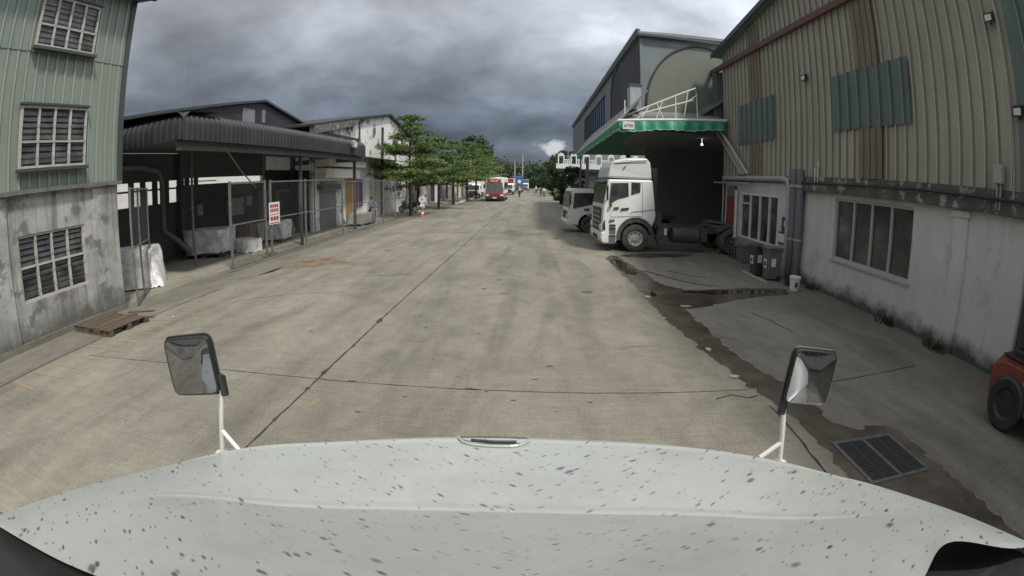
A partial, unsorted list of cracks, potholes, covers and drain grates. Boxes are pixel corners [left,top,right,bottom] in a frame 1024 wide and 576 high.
drain grate [831,433,930,484]
